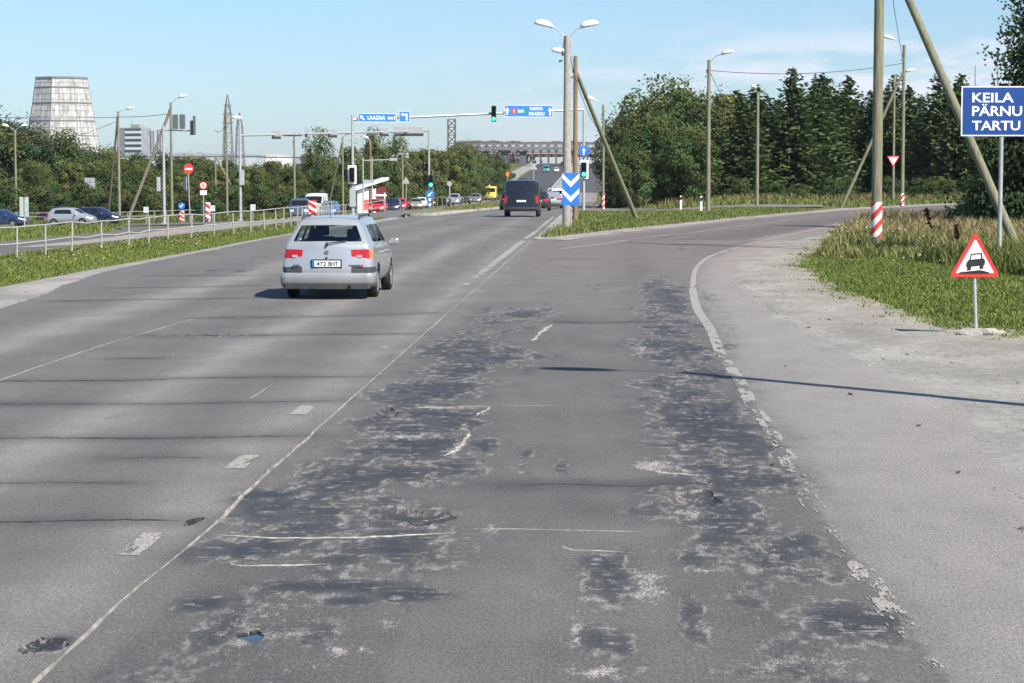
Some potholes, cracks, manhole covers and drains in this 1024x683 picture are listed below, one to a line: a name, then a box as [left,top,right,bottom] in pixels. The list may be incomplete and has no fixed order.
pothole [17,637,70,655]
pothole [373,407,400,420]
pothole [384,509,458,526]
pothole [236,630,265,641]
